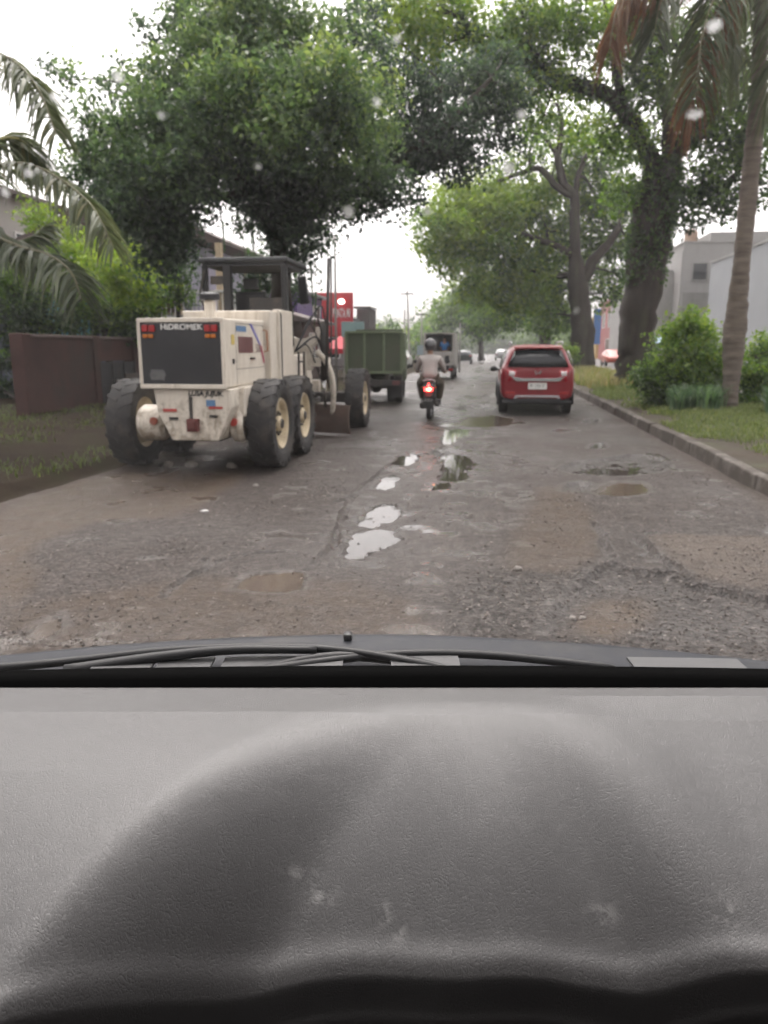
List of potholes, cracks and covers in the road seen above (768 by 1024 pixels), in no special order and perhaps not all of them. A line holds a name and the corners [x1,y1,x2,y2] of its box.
pothole [388,453,423,466]
pothole [355,503,405,529]
pothole [431,481,455,491]
pothole [556,454,674,476]
pothole [232,570,310,593]
pothole [336,528,408,560]
pothole [453,415,517,428]
pothole [435,454,479,482]
pothole [371,474,400,491]
pothole [537,557,768,661]
pothole [588,481,653,497]
pothole [438,428,472,445]
